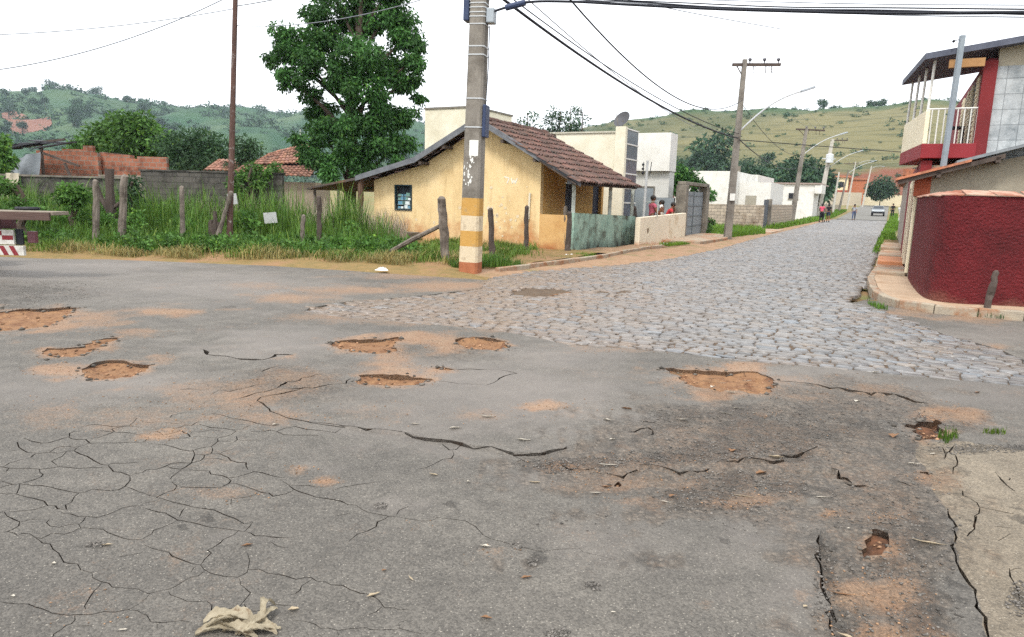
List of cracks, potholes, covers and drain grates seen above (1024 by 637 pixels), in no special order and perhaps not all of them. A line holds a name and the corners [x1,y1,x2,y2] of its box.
pothole [36,335,121,360]
pothole [657,366,782,395]
pothole [453,335,516,351]
pothole [351,372,430,388]
crack [0,352,744,636]
pothole [857,528,890,559]
crack [947,494,1007,637]
pothole [891,418,952,443]
pothole [326,336,404,354]
crack [727,446,818,464]
pothole [75,360,157,381]
pothole [0,306,86,331]
